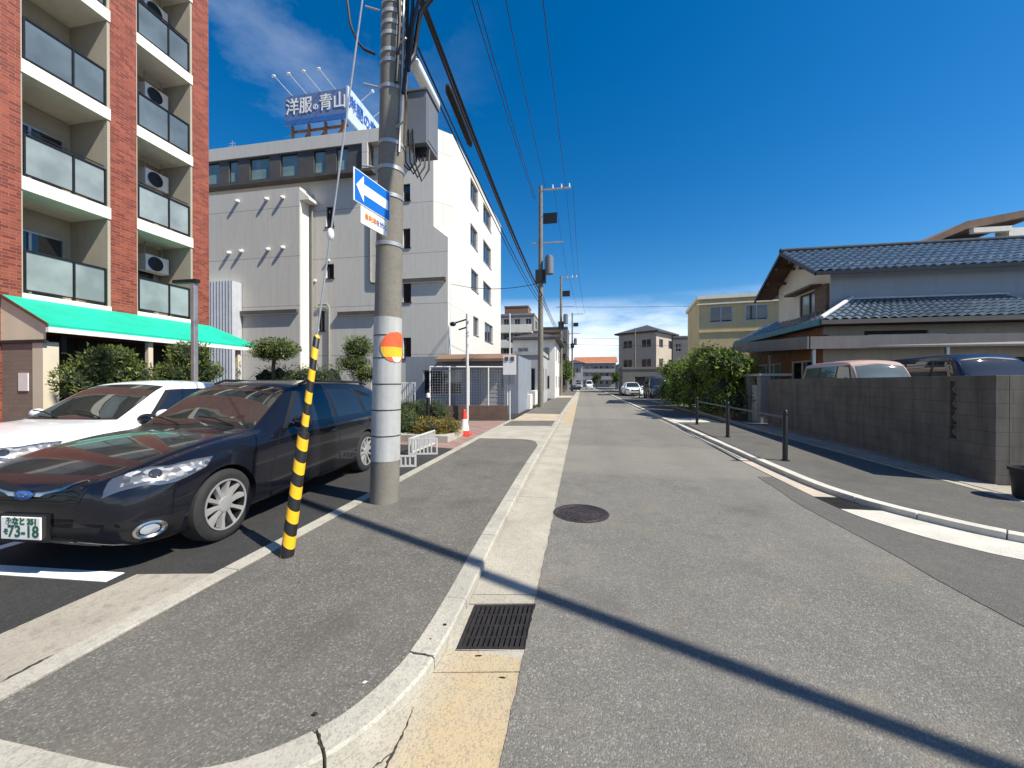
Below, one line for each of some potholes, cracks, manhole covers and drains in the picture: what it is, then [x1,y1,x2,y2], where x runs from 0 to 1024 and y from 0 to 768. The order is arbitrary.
crack [373,707,414,768]
manhole cover [554,504,609,523]
drain grate [457,604,535,650]
